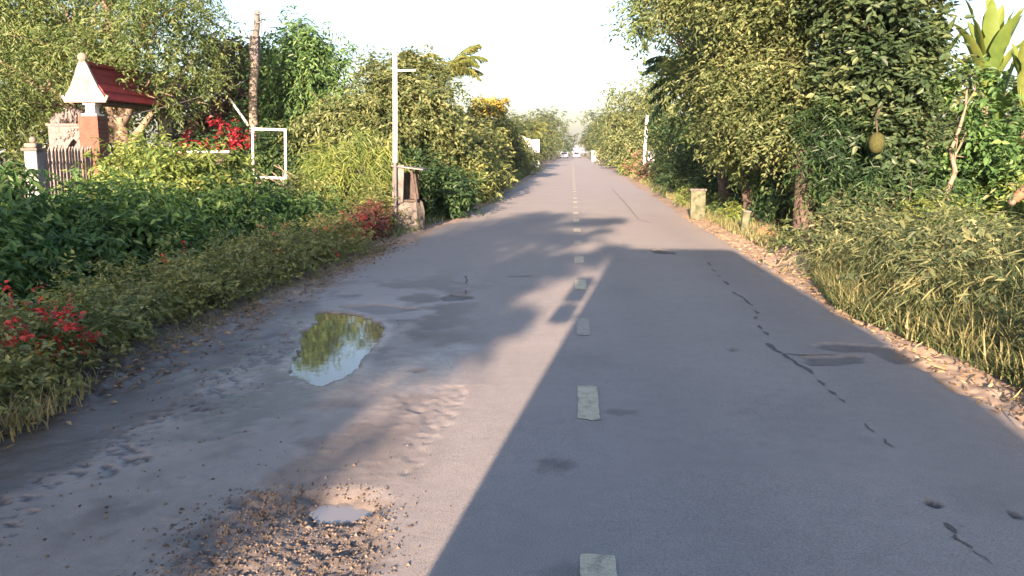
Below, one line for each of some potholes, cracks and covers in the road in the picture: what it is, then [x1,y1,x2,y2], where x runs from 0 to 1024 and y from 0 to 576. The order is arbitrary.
pothole [155,484,399,576]
pothole [283,310,388,387]
crack [707,262,845,402]
pothole [438,293,476,302]
crack [944,523,991,563]
